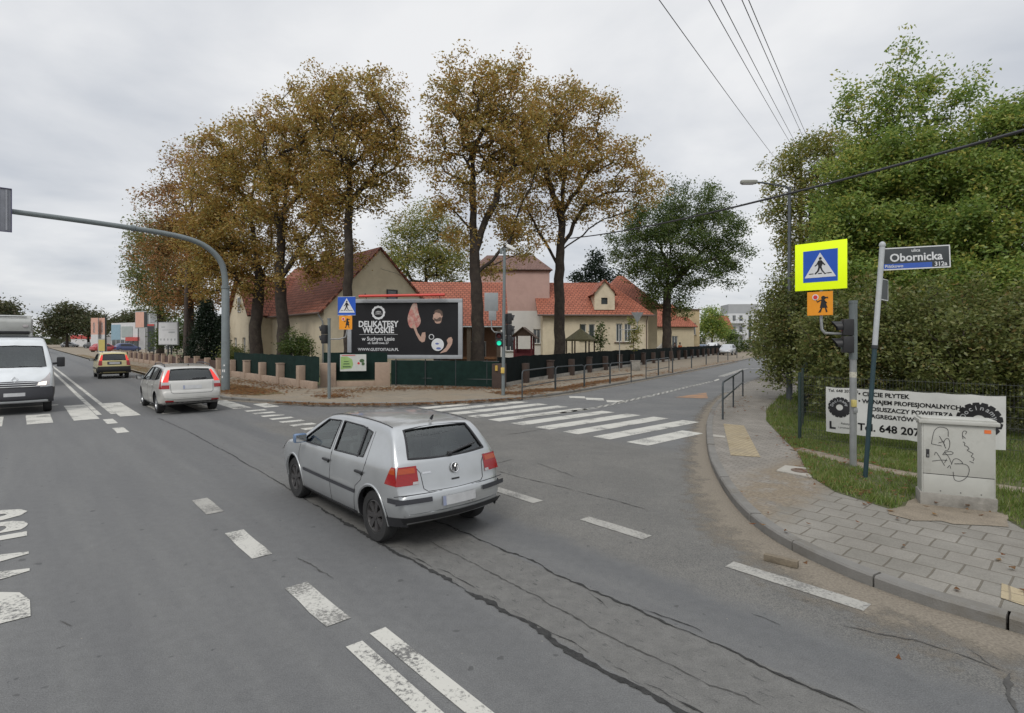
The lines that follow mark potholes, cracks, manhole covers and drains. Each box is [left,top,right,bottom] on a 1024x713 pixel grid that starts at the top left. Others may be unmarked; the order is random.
crack [166,421,1018,713]
manhole cover [776,465,812,478]
